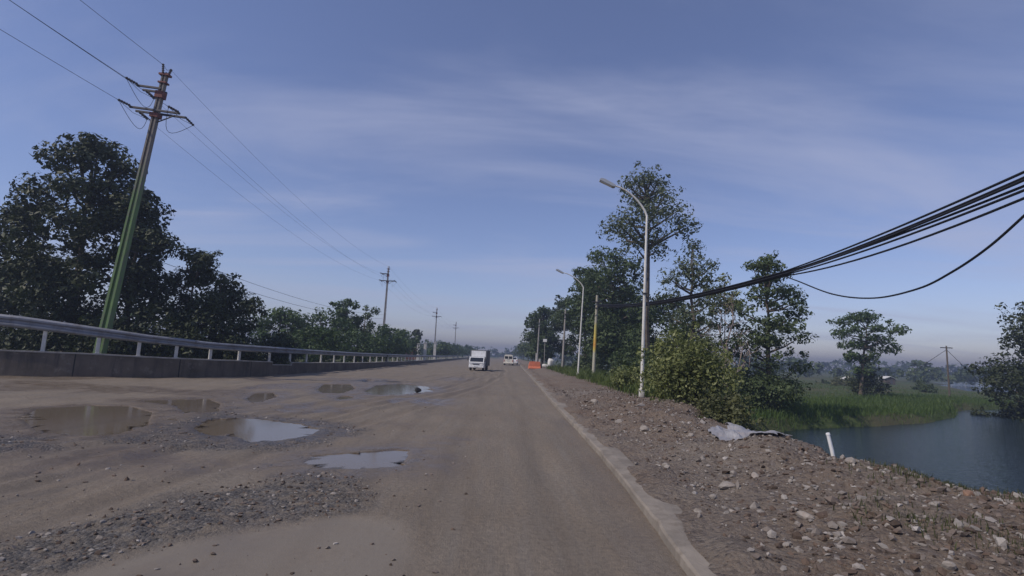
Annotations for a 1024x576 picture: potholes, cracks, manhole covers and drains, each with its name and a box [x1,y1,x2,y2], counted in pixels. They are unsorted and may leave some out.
pothole [129,397,235,415]
pothole [234,391,288,404]
pothole [354,383,442,395]
pothole [176,414,338,446]
pothole [308,383,367,394]
pothole [262,447,434,477]
pothole [0,404,187,442]
